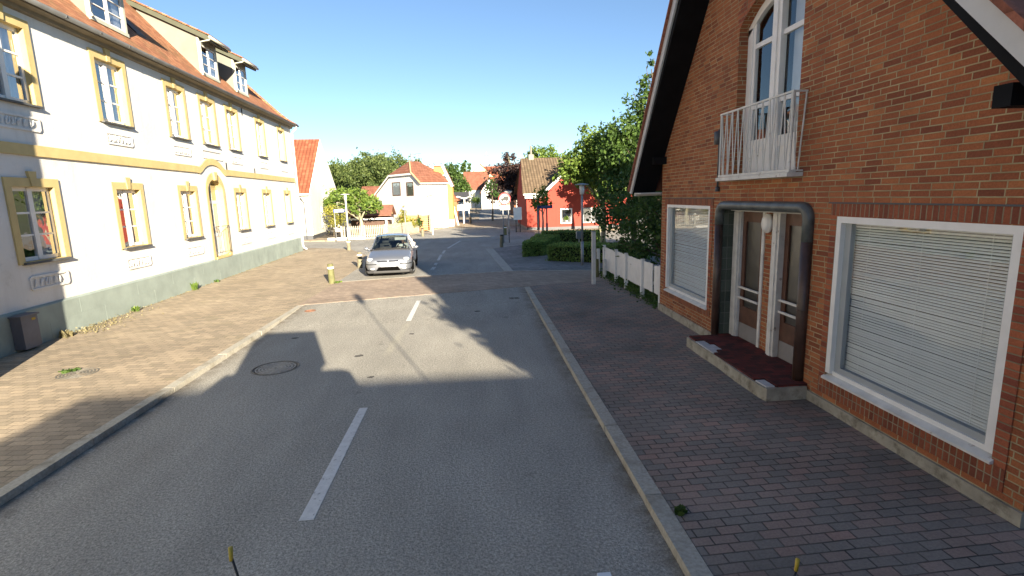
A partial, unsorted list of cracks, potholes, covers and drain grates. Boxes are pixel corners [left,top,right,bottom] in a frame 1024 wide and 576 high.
manhole cover [250,361,300,376]
manhole cover [55,367,99,379]
